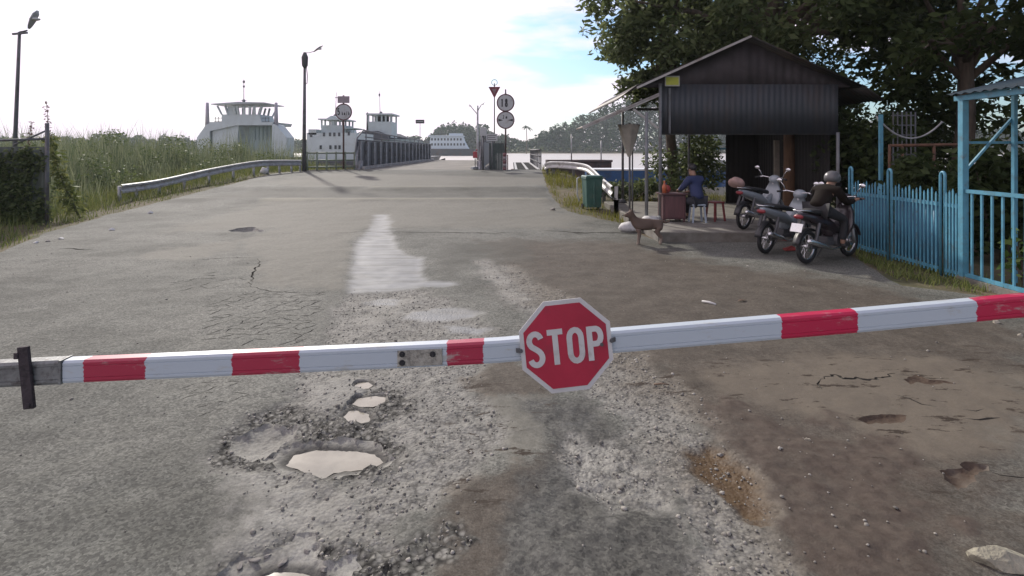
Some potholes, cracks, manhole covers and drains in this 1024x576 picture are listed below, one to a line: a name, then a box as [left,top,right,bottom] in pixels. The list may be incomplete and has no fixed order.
crack [817,373,936,407]
pothole [940,461,989,490]
pothole [858,414,907,424]
pothole [216,532,362,576]
crack [162,258,326,345]
pothole [260,436,395,481]
pothole [346,392,389,410]
pothole [337,406,378,424]
pothole [904,375,957,385]
pothole [351,378,379,392]
pothole [229,423,299,462]
